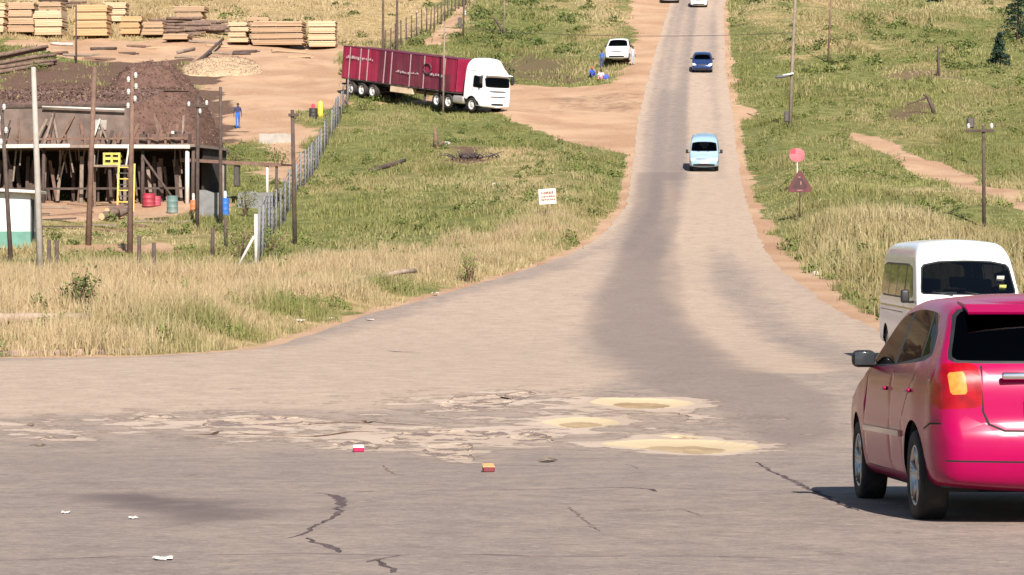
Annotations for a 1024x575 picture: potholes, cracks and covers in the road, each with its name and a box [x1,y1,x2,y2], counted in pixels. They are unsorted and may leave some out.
pothole [602,439,760,454]
pothole [590,398,695,409]
crack [195,420,415,437]
crack [566,506,600,531]
pothole [542,417,621,428]
